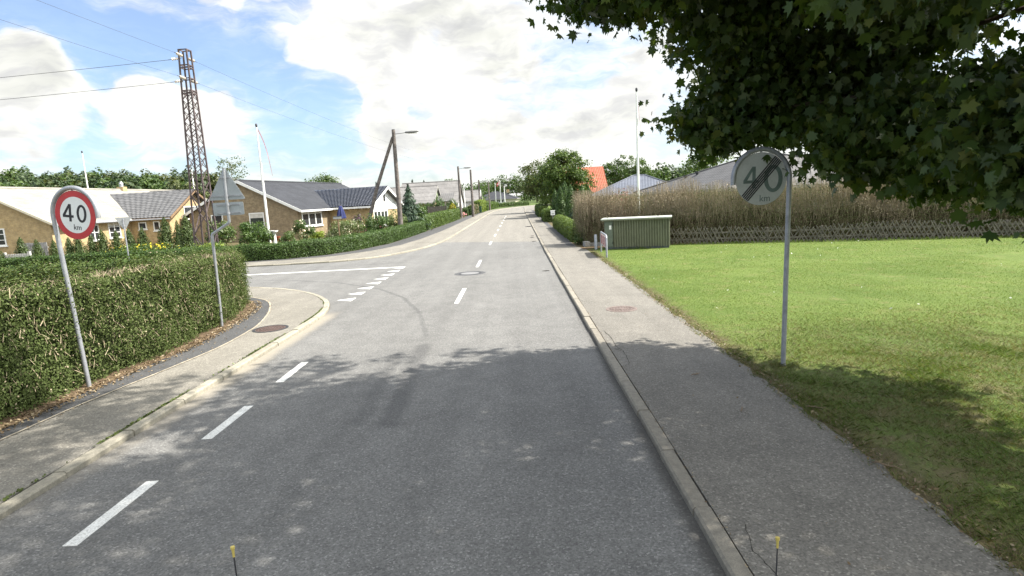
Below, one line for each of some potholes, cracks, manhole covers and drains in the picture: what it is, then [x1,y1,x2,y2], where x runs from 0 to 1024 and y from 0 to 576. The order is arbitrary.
manhole cover [252,325,289,333]
